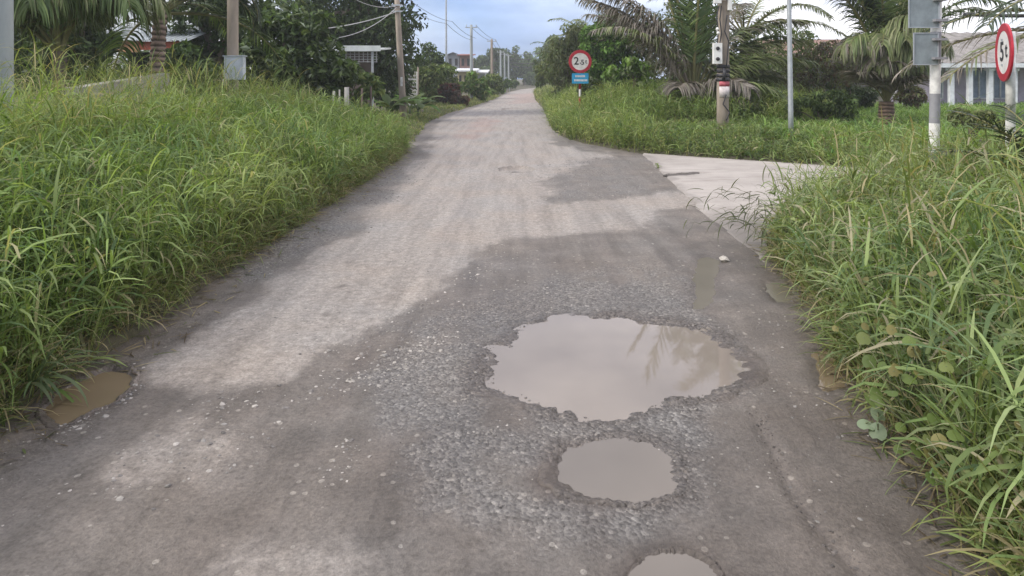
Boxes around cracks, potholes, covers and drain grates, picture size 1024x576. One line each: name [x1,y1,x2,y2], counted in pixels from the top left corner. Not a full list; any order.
pothole [461,309,770,426]
pothole [34,363,140,430]
pothole [626,546,725,576]
pothole [537,433,690,510]
